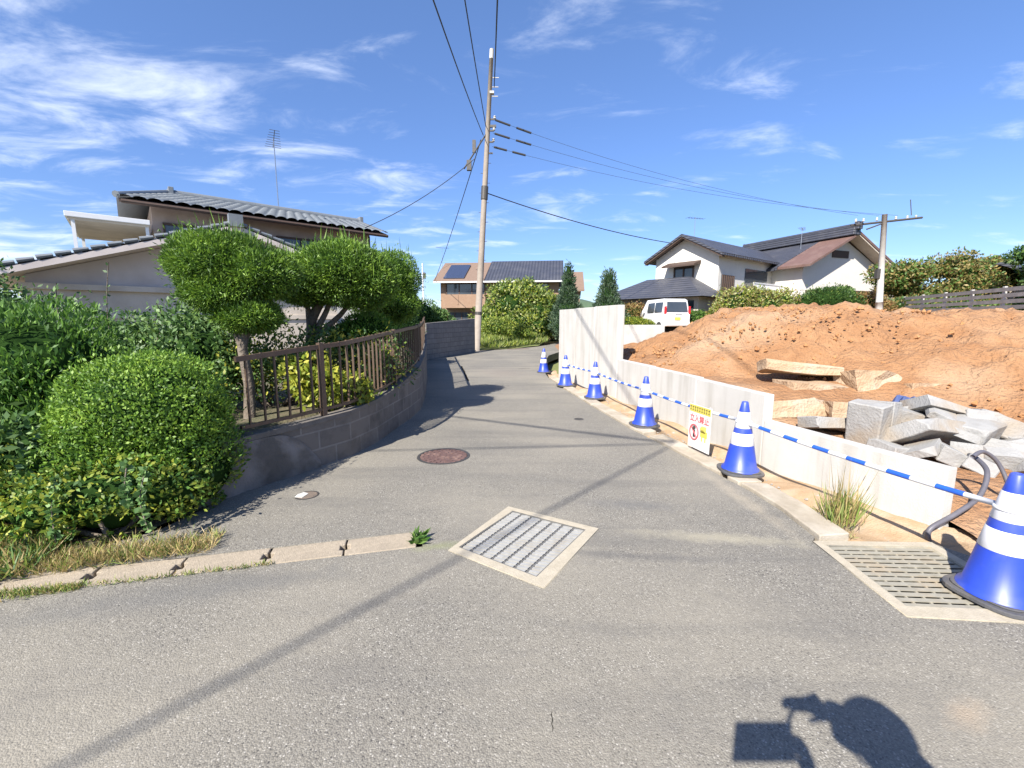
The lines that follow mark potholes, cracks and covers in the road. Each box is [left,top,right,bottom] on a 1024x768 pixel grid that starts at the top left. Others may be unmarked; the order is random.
drain grate [448,506,599,589]
utility cover [294,491,319,500]
manhole cover [417,448,470,465]
drain grate [812,541,1024,624]
